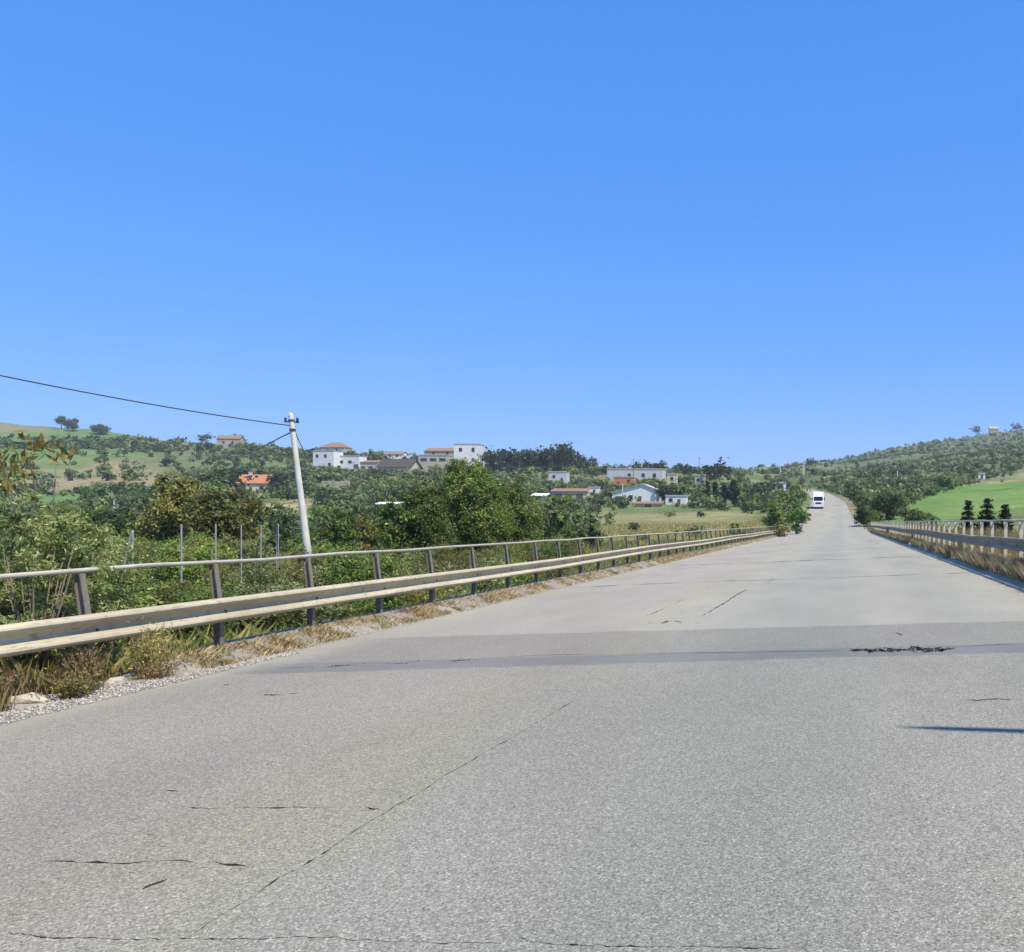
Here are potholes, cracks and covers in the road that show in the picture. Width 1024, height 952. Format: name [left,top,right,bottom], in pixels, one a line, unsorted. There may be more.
crack [62,860,249,890]
crack [647,579,774,624]
crack [189,700,577,937]
pothole [850,644,955,653]
